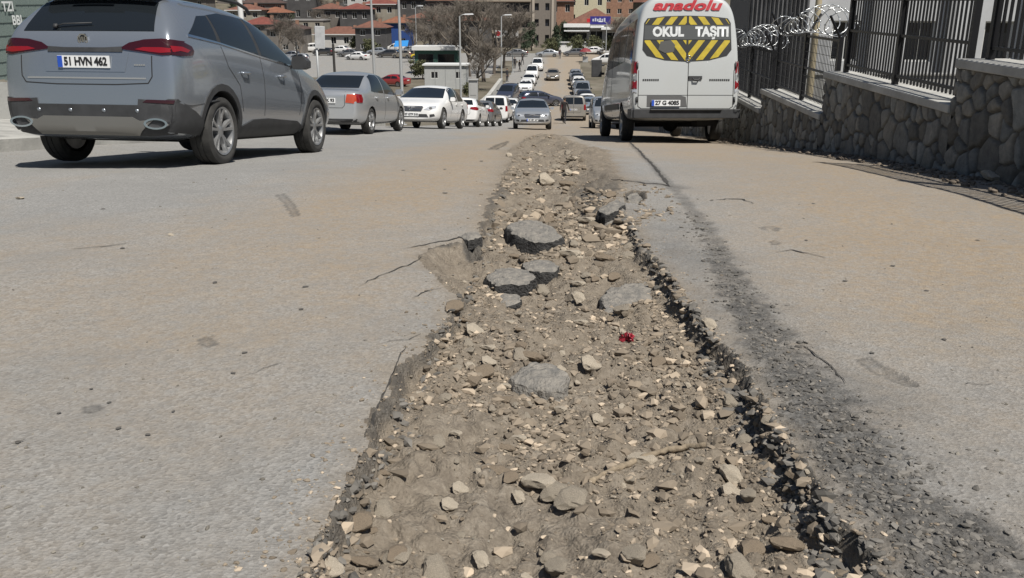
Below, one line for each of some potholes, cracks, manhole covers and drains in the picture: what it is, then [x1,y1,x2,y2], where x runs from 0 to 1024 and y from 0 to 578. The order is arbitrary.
crack [608,142,673,187]
crack [366,237,459,282]
crack [805,346,845,381]
pothole [299,133,884,578]
